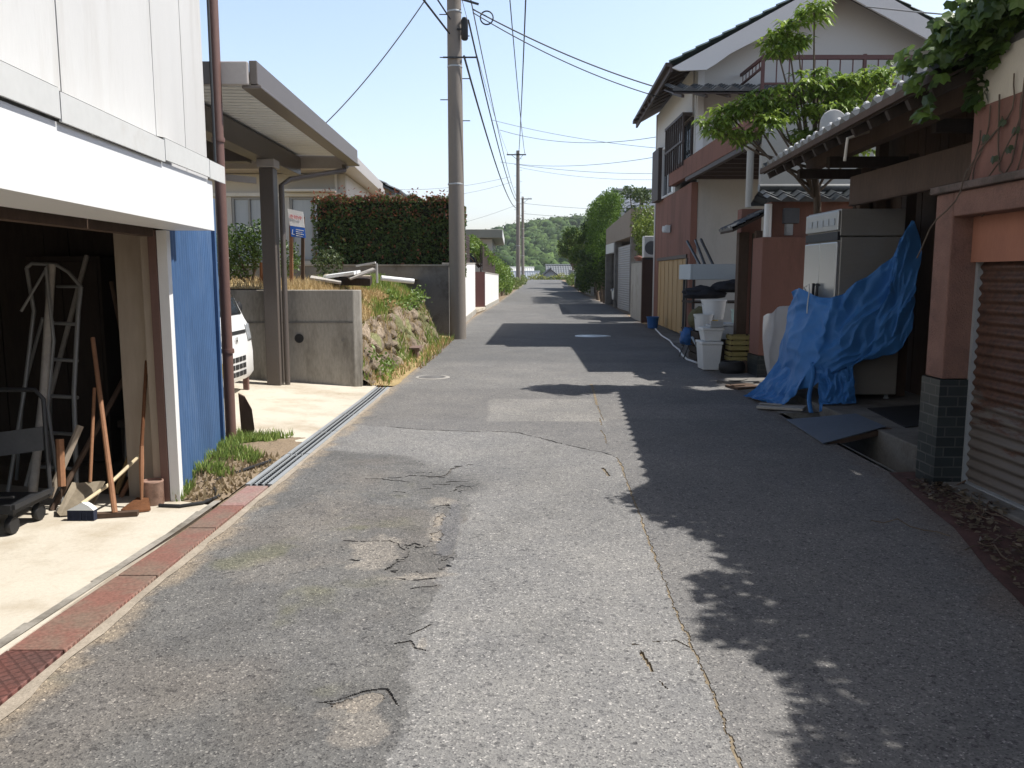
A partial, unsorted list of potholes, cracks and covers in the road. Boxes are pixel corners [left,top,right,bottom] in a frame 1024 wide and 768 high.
drain grate [342,399,376,415]
crack [397,384,743,768]
drain grate [287,431,337,456]
pothole [383,541,454,576]
drain grate [318,413,358,433]
pothole [429,530,445,543]
crack [365,464,473,493]
drain grate [246,454,309,487]
drain grate [361,387,389,400]
